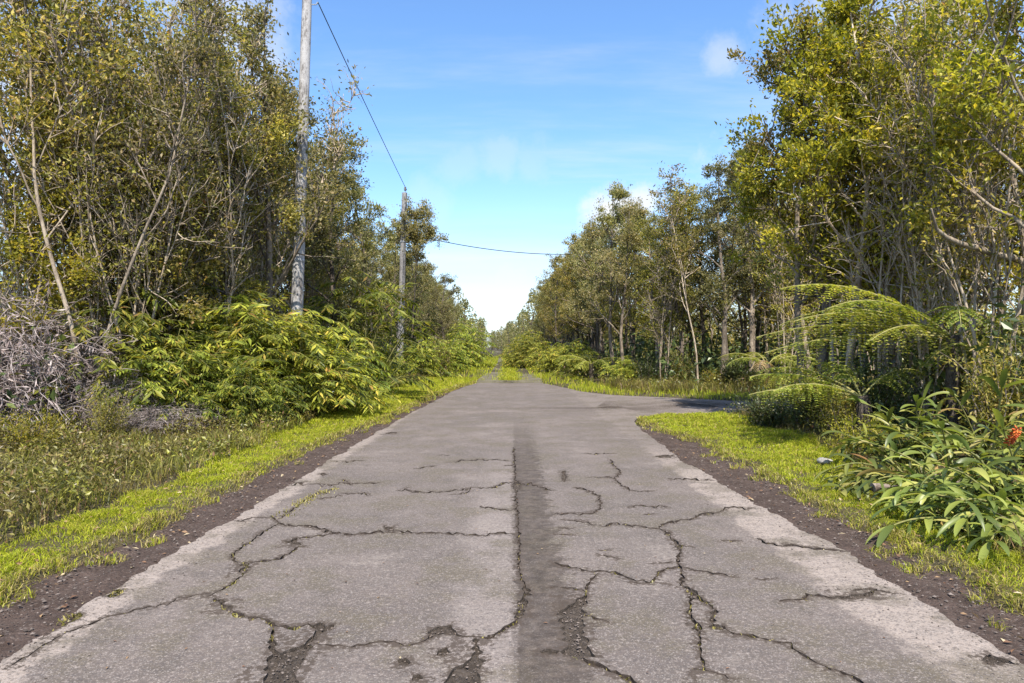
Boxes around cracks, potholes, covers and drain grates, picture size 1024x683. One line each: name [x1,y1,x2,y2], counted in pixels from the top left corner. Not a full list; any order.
crack [726,629,864,683]
crack [554,546,728,624]
crack [759,578,837,601]
crack [556,453,704,535]
crack [12,460,512,665]
crack [757,538,848,552]
crack [583,657,637,683]
crack [398,447,551,511]
